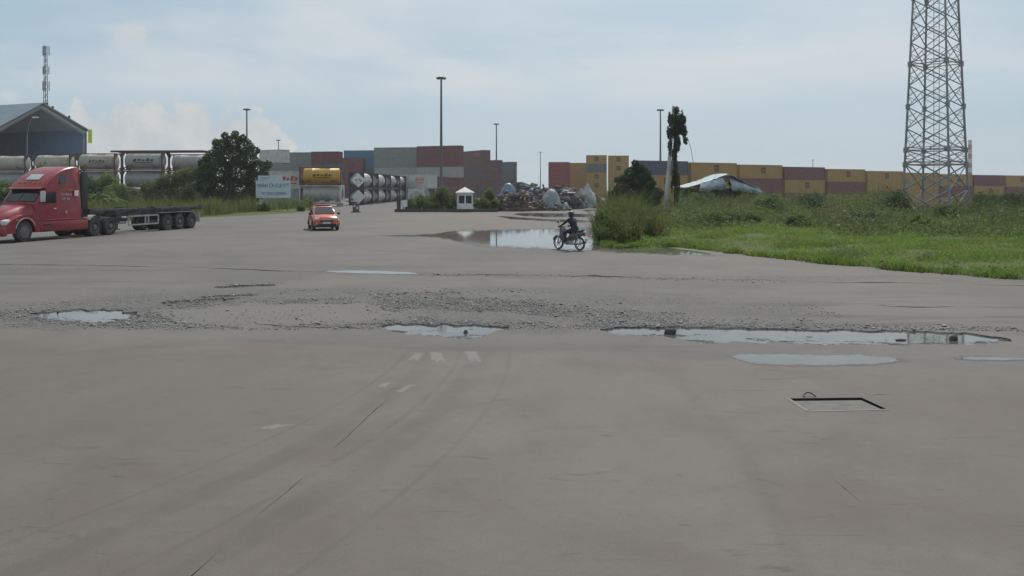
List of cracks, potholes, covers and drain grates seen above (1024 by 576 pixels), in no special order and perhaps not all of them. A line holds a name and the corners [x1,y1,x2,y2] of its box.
pothole [30,308,138,322]
pothole [381,323,509,339]
pothole [600,326,1011,345]
